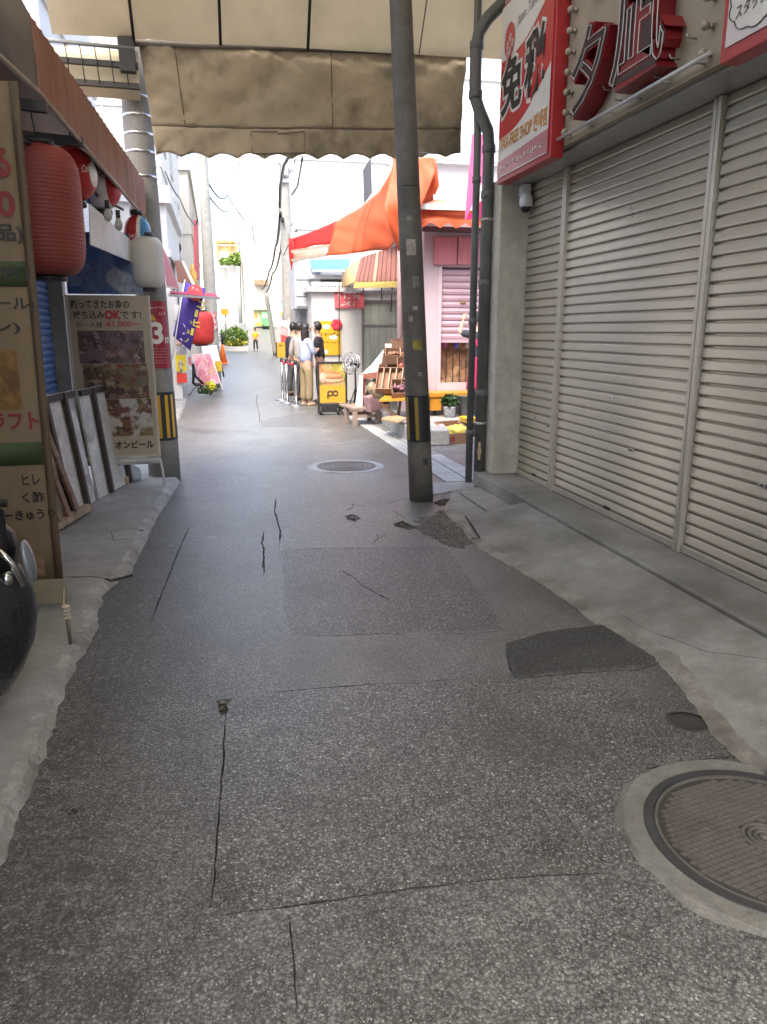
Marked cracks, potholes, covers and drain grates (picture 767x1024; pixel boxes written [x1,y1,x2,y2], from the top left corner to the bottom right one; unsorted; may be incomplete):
pothole [394,521,416,530]
crack [148,528,189,631]
manhole cover [615,759,767,938]
pothole [216,698,231,716]
crack [261,500,281,576]
manhole cover [308,460,384,474]
